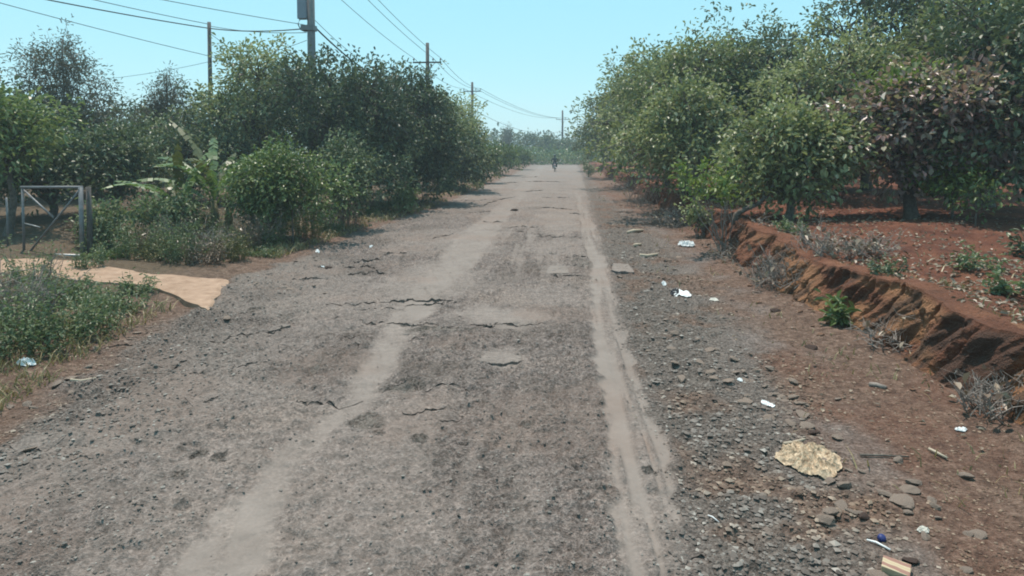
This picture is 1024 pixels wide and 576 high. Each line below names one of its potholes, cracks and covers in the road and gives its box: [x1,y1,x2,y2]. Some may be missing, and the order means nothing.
crack [296,369,479,422]
crack [289,231,547,342]
